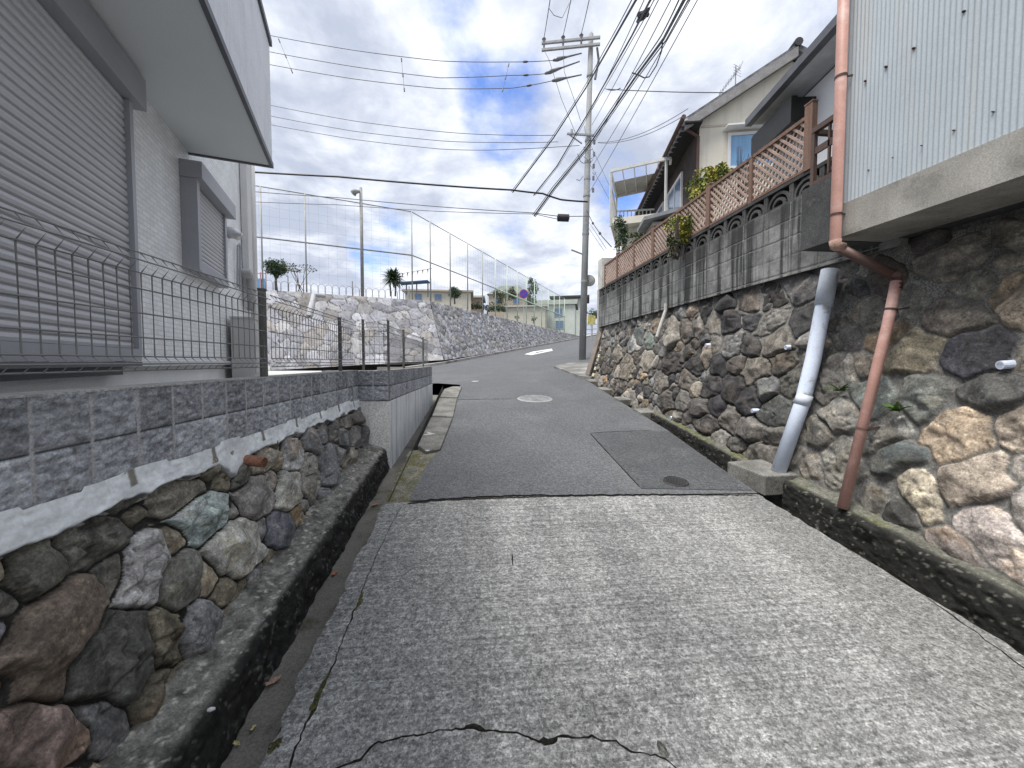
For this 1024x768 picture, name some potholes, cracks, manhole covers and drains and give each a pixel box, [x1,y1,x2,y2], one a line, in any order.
crack [335,723,676,768]
crack [819,515,1024,668]
crack [289,507,402,768]
manhole cover [663,476,689,487]
